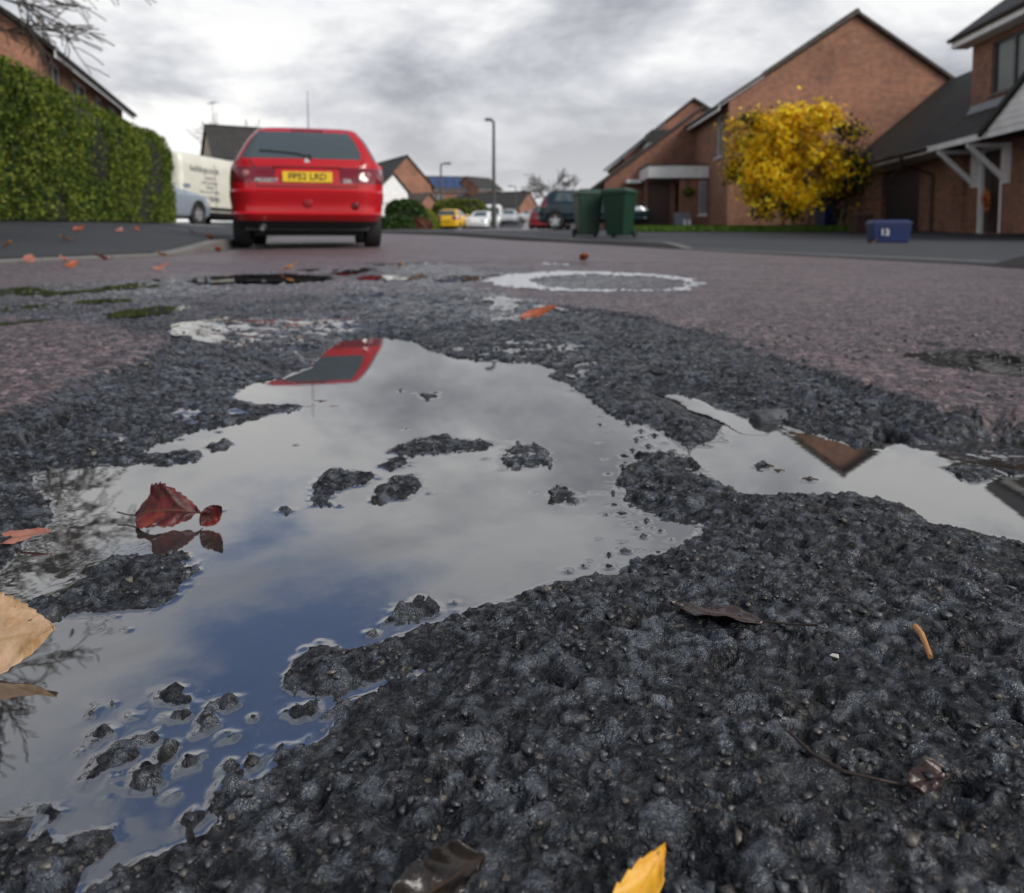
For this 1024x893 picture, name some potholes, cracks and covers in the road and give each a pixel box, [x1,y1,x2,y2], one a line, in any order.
pothole [0,292,1024,893]
pothole [185,272,339,286]
